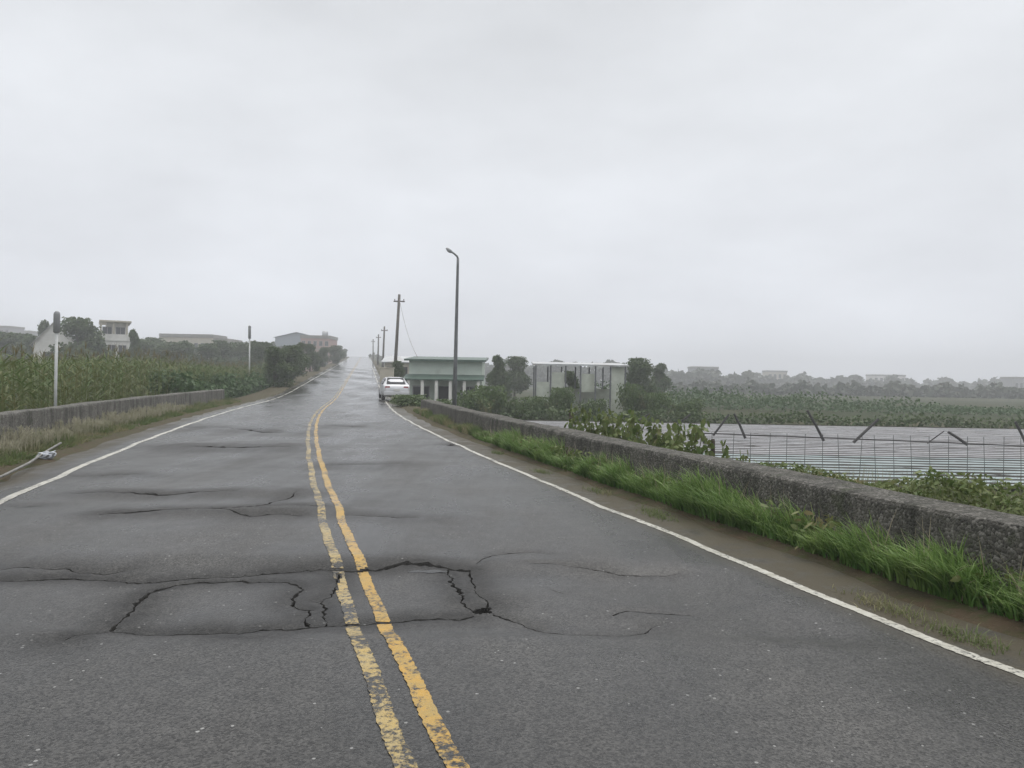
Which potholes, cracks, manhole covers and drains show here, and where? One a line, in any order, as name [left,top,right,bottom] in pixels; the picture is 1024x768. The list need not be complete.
crack [195,428,289,448]
crack [4,553,691,641]
crack [78,491,306,517]
